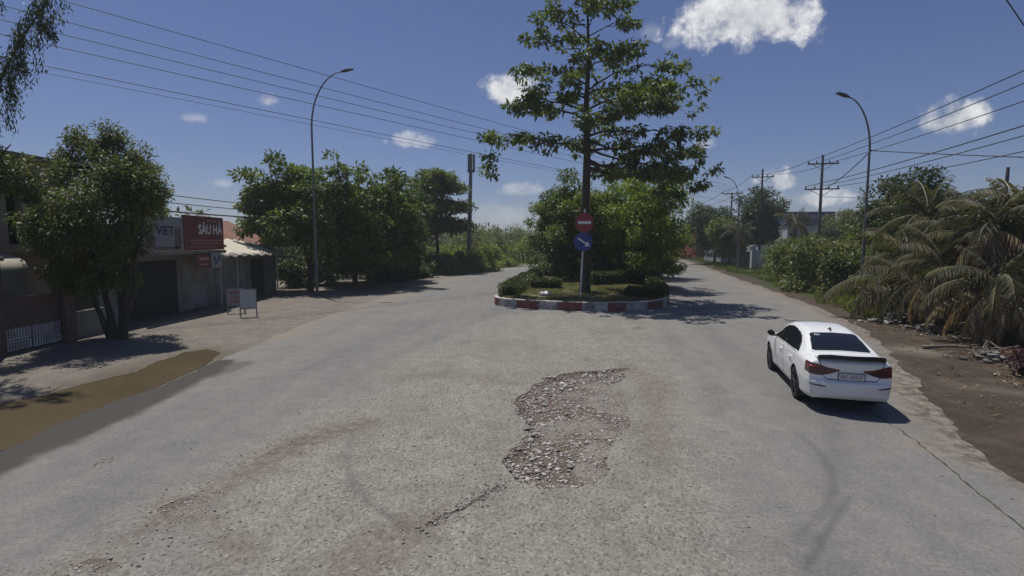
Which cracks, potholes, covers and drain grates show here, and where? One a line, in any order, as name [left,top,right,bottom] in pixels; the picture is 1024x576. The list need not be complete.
pothole [501,368,631,489]
crack [425,485,500,527]
pothole [156,489,218,524]
crack [869,411,1024,530]
pothole [93,456,114,468]
